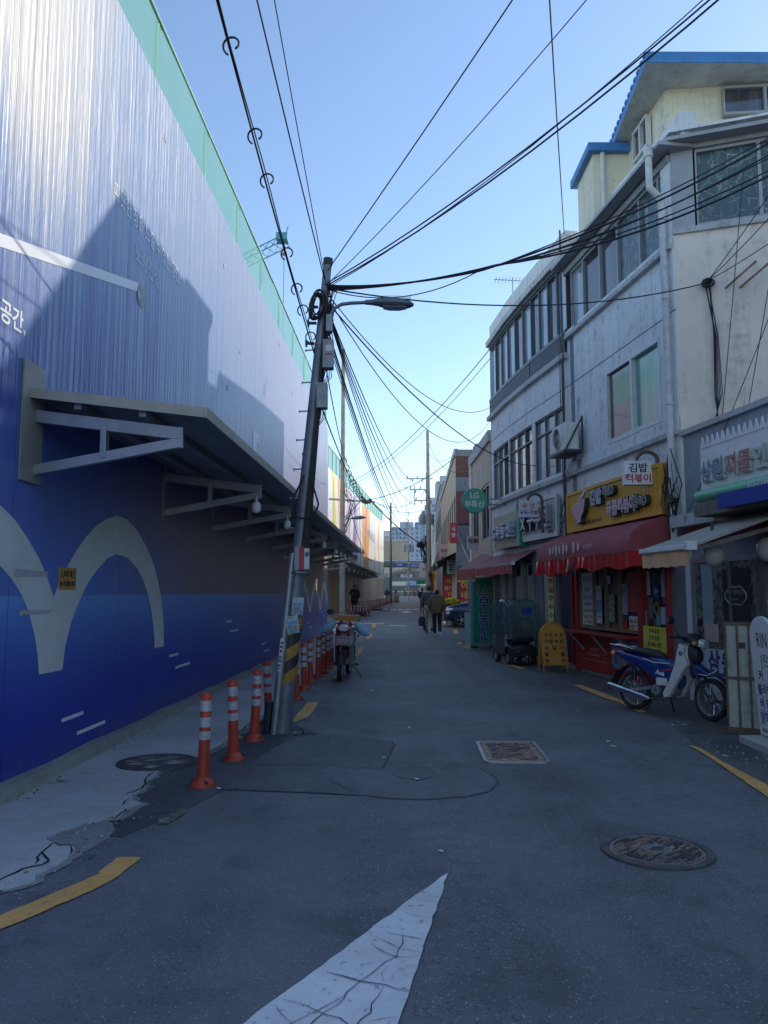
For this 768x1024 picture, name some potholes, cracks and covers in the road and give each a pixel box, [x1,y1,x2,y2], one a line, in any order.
pothole [48,820,117,852]
crack [0,842,75,880]
manhole cover [600,833,716,871]
manhole cover [476,741,551,764]
manhole cover [116,753,197,772]
